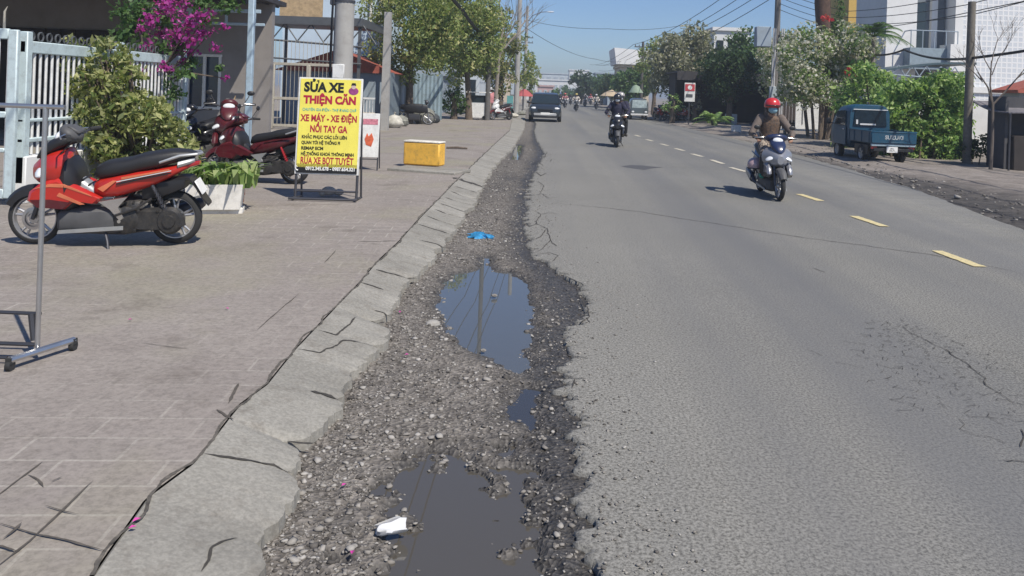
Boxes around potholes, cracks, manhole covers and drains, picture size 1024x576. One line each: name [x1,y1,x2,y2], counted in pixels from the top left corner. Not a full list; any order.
pothole [339,435,582,576]
crack [811,318,1024,443]
pothole [489,377,554,442]
pothole [426,253,546,375]
